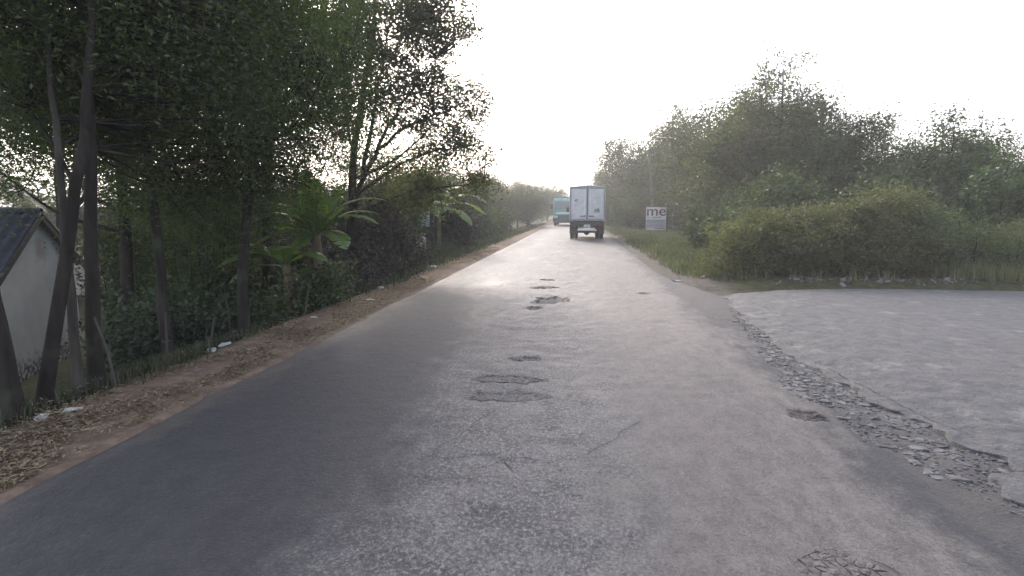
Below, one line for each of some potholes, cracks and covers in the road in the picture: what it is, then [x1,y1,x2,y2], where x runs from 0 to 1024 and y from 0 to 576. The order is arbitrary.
pothole [468,389,554,402]
pothole [531,296,570,304]
pothole [788,409,830,421]
pothole [472,374,549,384]
crack [471,456,566,474]
